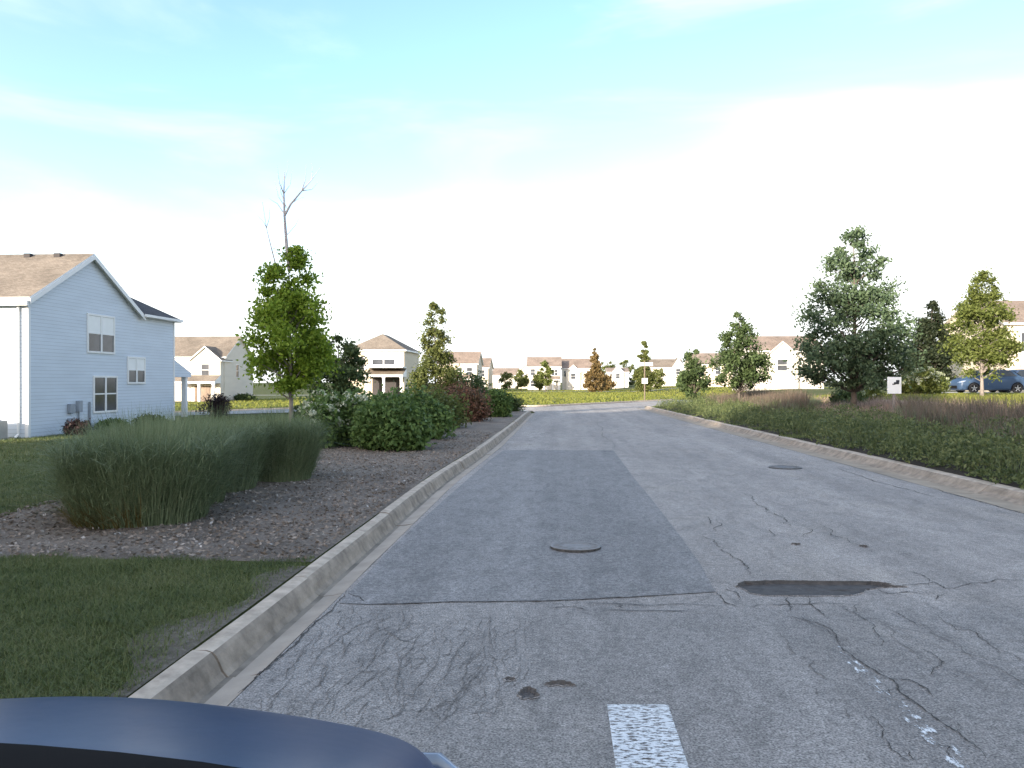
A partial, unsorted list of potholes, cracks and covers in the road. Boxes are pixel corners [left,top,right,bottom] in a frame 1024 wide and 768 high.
crack [703,517,751,573]
pothole [735,580,908,596]
crack [716,575,1023,764]
manhole cover [549,541,603,553]
crack [238,590,715,731]
pothole [517,686,541,699]
crack [752,496,862,546]
